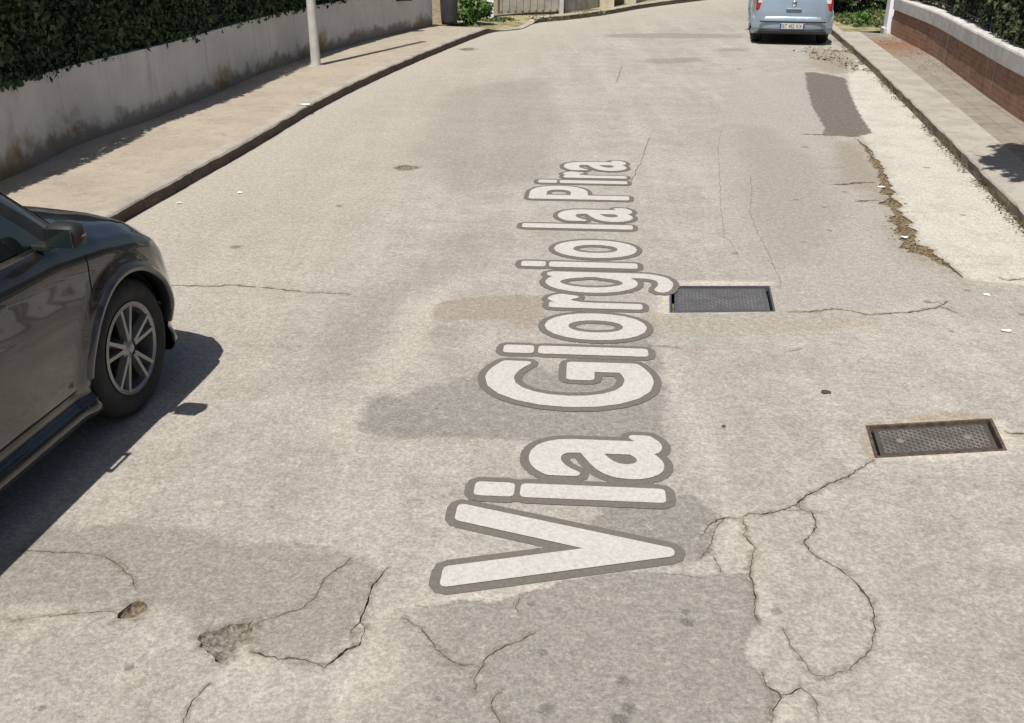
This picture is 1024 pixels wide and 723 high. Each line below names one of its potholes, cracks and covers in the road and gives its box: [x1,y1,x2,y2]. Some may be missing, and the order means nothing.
crack [700,461,876,677]
crack [762,673,819,723]
manhole cover [866,418,1007,458]
crack [171,285,343,294]
crack [804,301,956,315]
manhole cover [669,286,775,313]
crack [252,558,351,625]
pothole [198,622,253,663]
crack [15,550,136,588]
crack [402,598,536,723]
crack [253,568,388,668]
